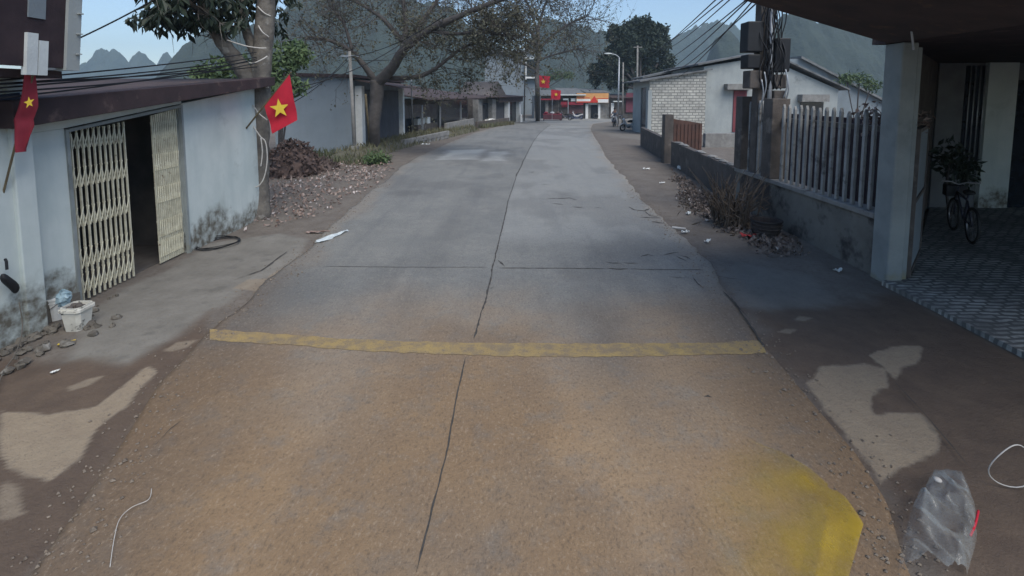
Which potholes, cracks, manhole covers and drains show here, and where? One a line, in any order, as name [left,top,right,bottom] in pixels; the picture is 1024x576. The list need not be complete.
crack [416,125,550,572]
